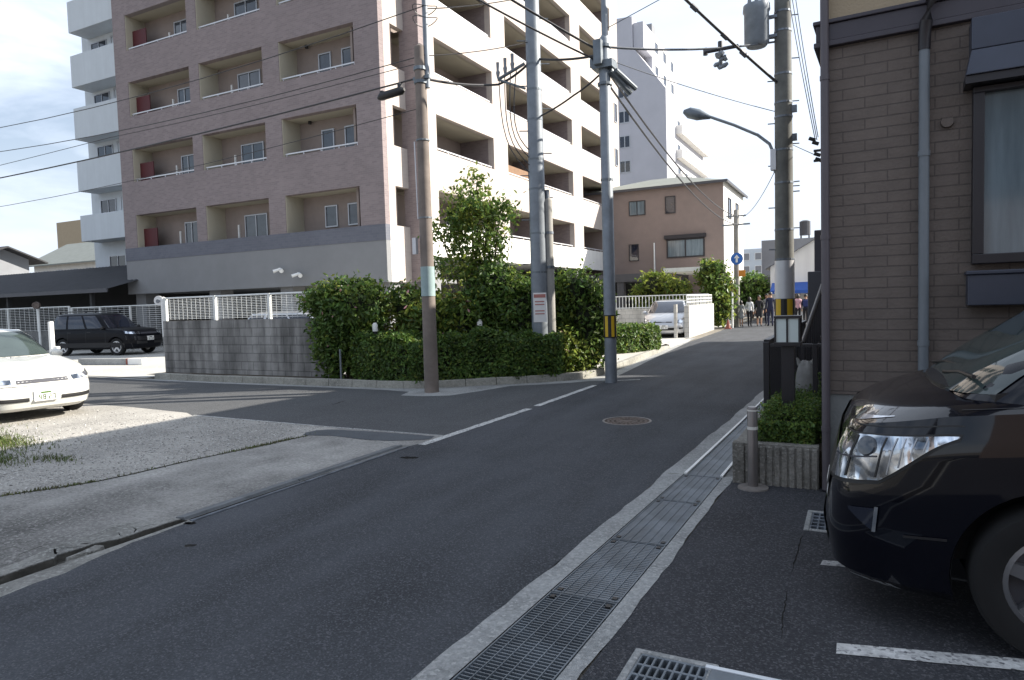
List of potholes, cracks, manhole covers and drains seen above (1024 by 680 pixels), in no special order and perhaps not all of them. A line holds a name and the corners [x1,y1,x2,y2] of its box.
drain grate [657,474,722,504]
drain grate [616,648,719,680]
crack [781,536,803,639]
drain grate [803,510,827,533]
drain grate [451,591,618,680]
drain grate [552,538,666,604]
drain grate [612,499,701,546]
manhole cover [602,416,652,425]
